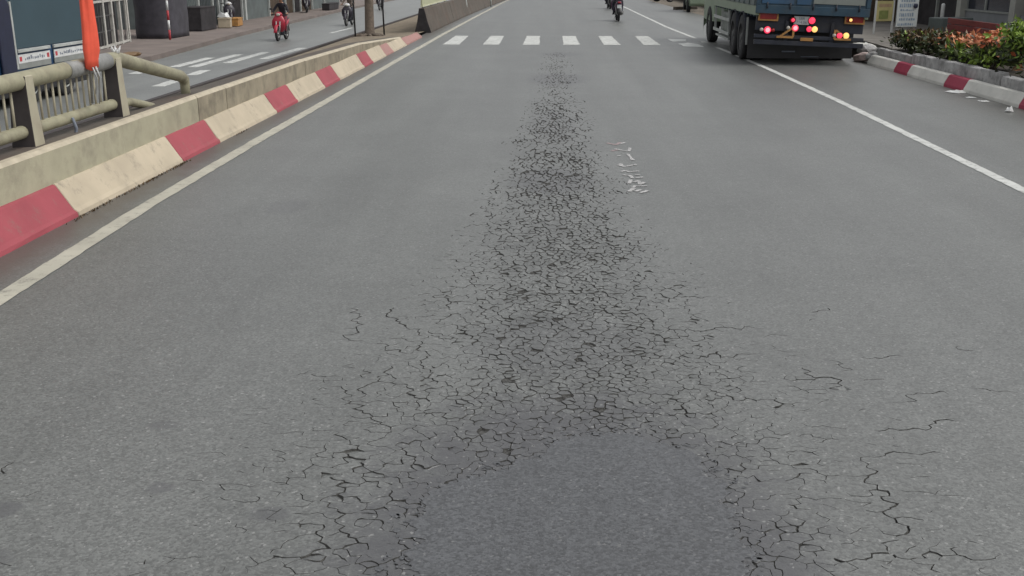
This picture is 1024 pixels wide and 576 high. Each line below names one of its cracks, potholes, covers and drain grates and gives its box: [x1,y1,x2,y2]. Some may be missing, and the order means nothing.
crack [129,53,999,576]
